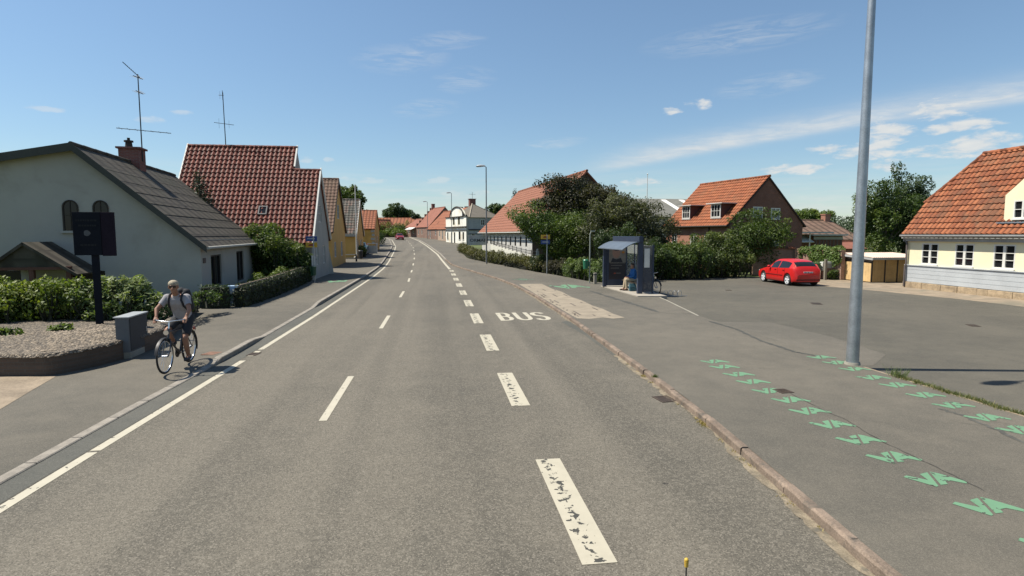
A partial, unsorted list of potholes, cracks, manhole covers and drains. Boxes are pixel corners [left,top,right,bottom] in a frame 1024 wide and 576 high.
drain grate [652,395,676,403]
